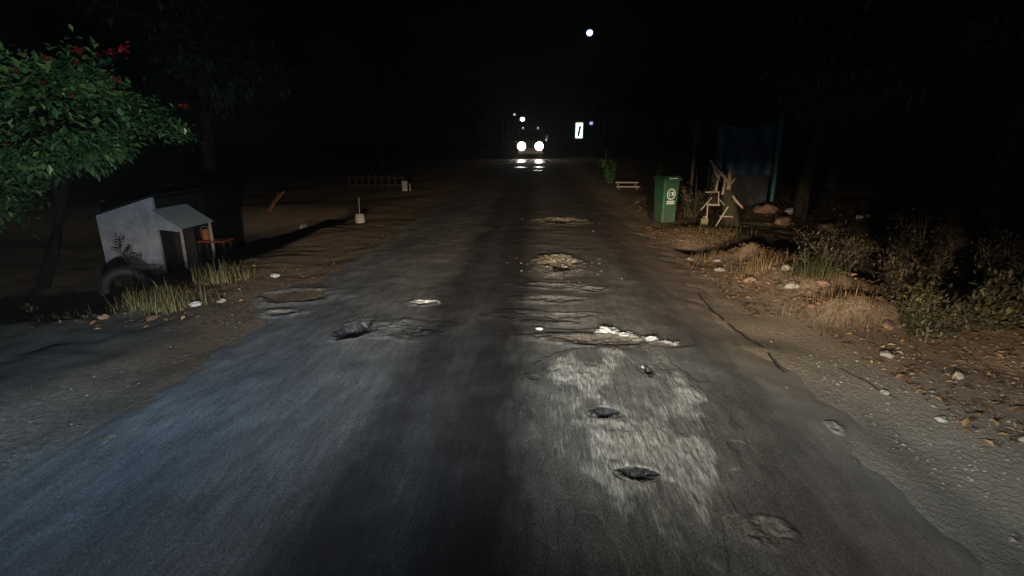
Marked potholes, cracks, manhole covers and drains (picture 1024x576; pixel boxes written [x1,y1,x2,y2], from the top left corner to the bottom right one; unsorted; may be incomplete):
pothole [522,253,593,279]
pothole [822,420,847,437]
pothole [404,299,444,308]
pothole [322,315,383,344]
pothole [737,512,803,556]
pothole [253,308,314,319]
crack [697,293,785,373]
pothole [641,364,656,378]
pothole [507,332,681,349]
pothole [613,467,661,484]
pothole [249,285,348,308]
pothole [525,216,601,226]
